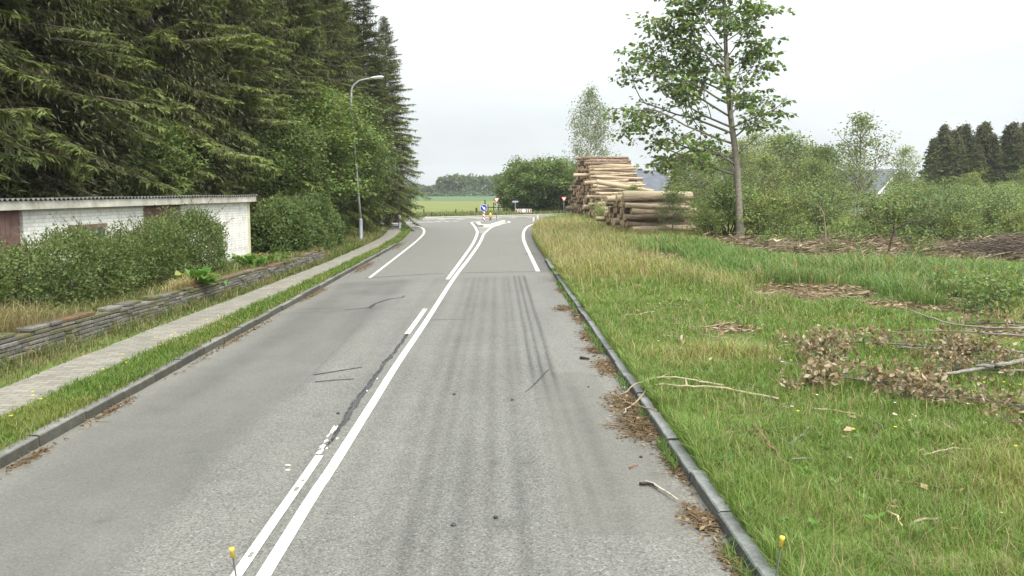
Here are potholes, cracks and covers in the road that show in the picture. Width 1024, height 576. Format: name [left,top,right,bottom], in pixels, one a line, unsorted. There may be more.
crack [347,296,404,310]
crack [313,334,408,448]
